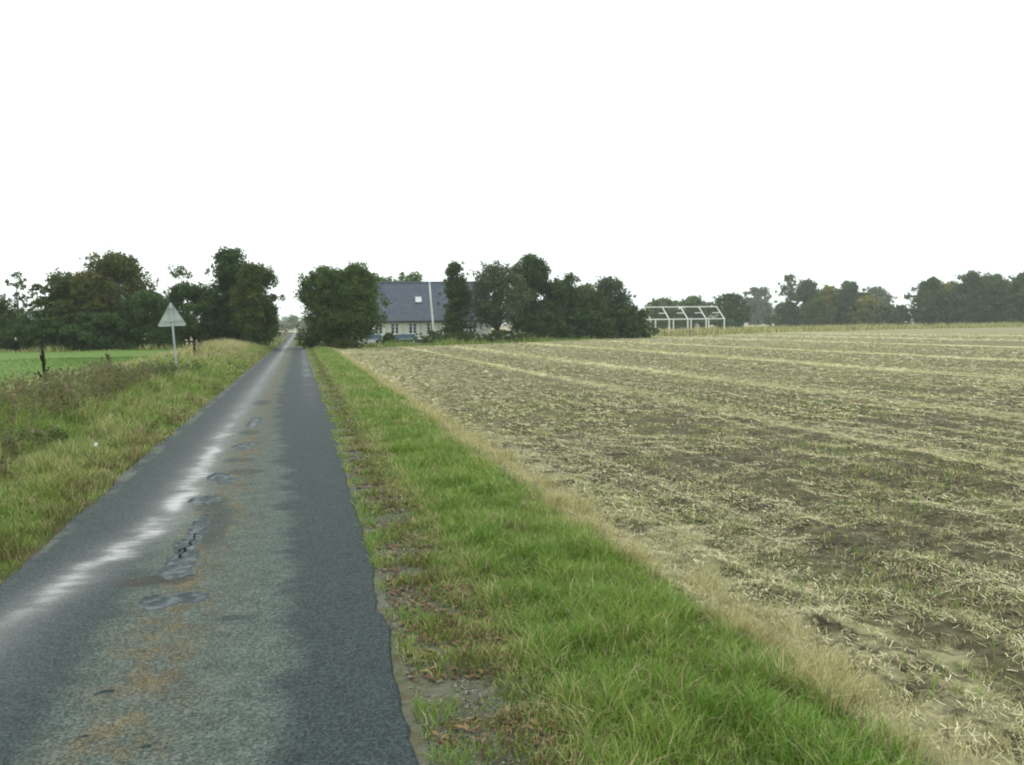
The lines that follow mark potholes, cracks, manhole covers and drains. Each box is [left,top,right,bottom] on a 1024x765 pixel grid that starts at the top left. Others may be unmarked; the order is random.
pothole [129,589,223,617]
pothole [225,440,265,453]
pothole [148,511,222,586]
pothole [201,470,243,488]
pothole [240,416,269,429]
pothole [183,491,228,508]
